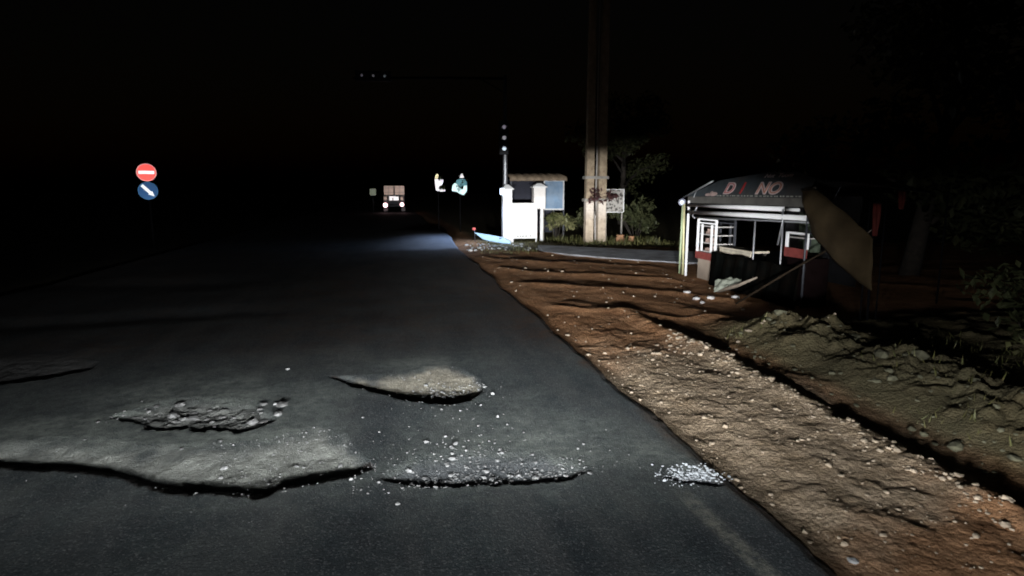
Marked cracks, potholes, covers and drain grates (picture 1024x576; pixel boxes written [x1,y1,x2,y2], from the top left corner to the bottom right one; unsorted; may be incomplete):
pothole [377,444,593,489]
pothole [106,396,277,435]
pothole [327,365,487,406]
